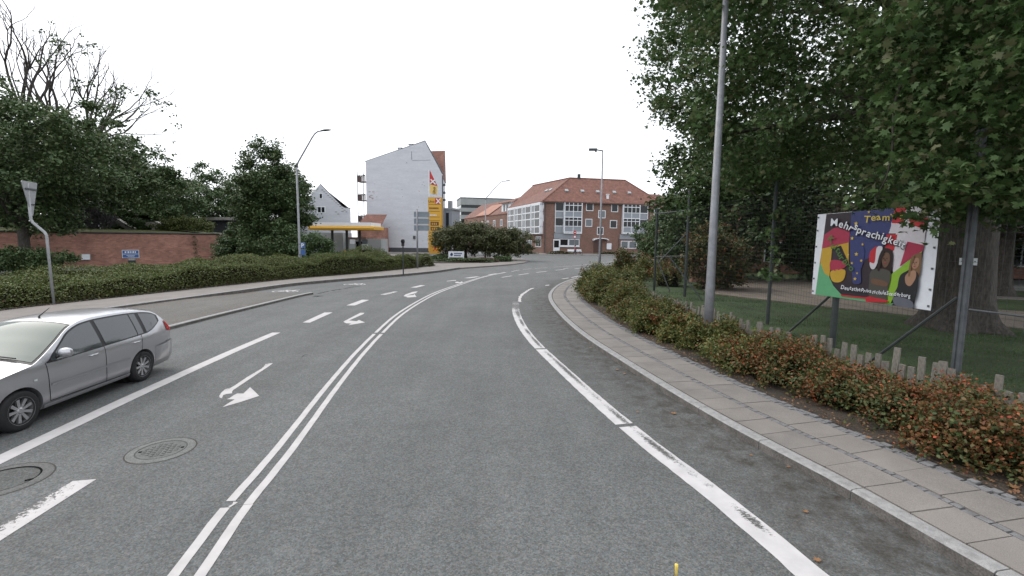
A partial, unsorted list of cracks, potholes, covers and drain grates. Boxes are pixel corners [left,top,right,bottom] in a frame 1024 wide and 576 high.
manhole cover [0,462,57,496]
manhole cover [123,437,197,464]
